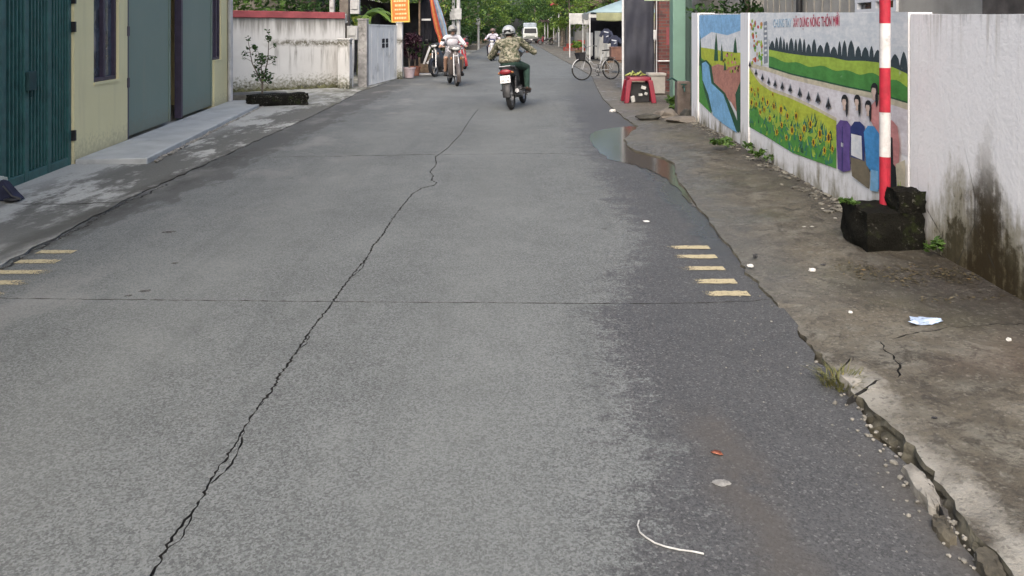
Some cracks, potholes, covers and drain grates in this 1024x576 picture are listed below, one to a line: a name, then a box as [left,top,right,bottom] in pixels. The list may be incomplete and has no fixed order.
crack [830,357,878,405]
crack [7,110,766,576]
crack [925,481,946,525]
crack [880,342,902,377]
